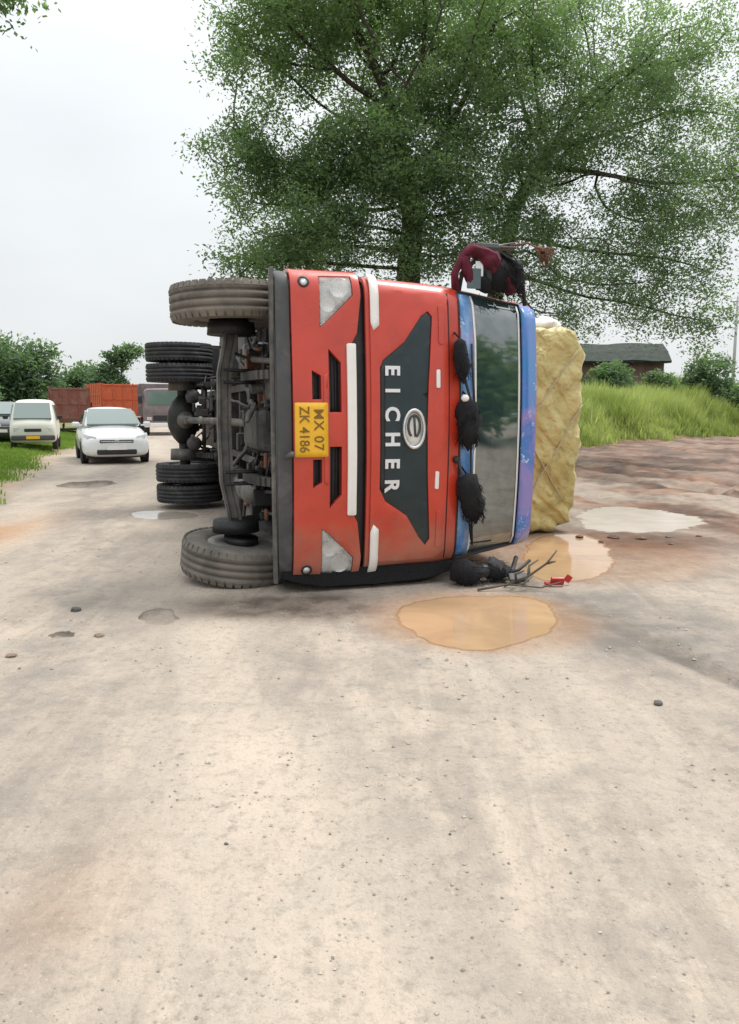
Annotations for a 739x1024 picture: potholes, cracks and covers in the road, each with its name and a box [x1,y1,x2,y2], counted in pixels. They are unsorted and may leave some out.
pothole [56,480,115,488]
pothole [138,608,179,625]
pothole [48,631,75,639]
